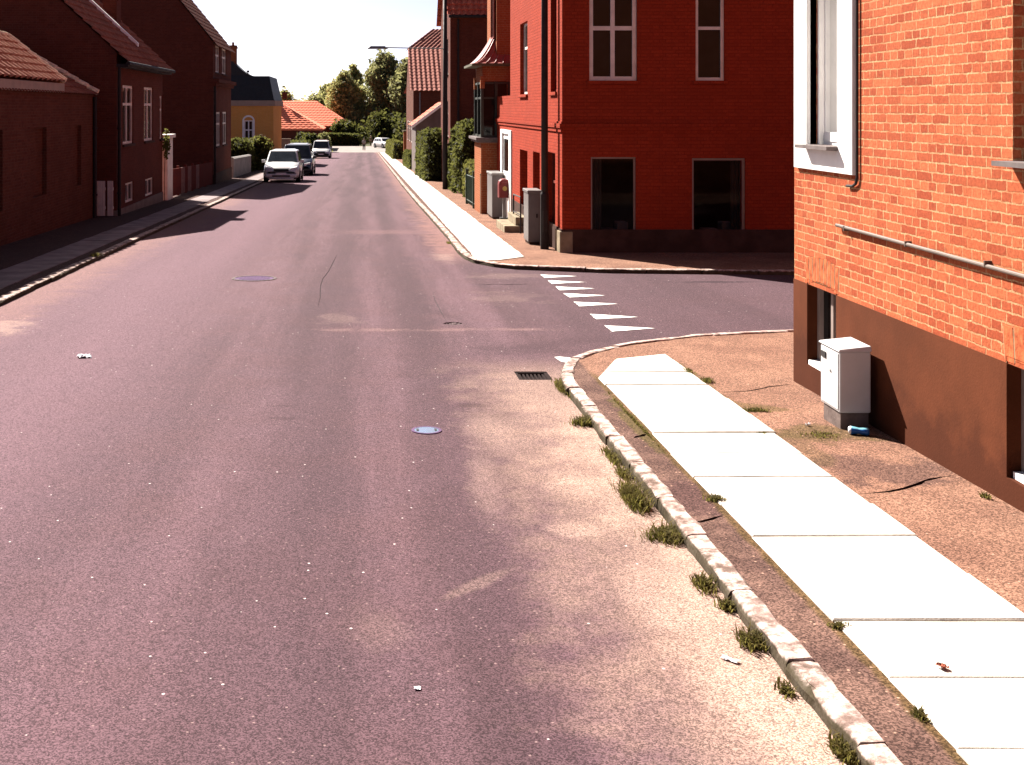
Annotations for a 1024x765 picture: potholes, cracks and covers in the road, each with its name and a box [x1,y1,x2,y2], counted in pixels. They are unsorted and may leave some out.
drain grate [514,371,553,380]
crack [873,475,954,493]
manhole cover [411,426,442,434]
